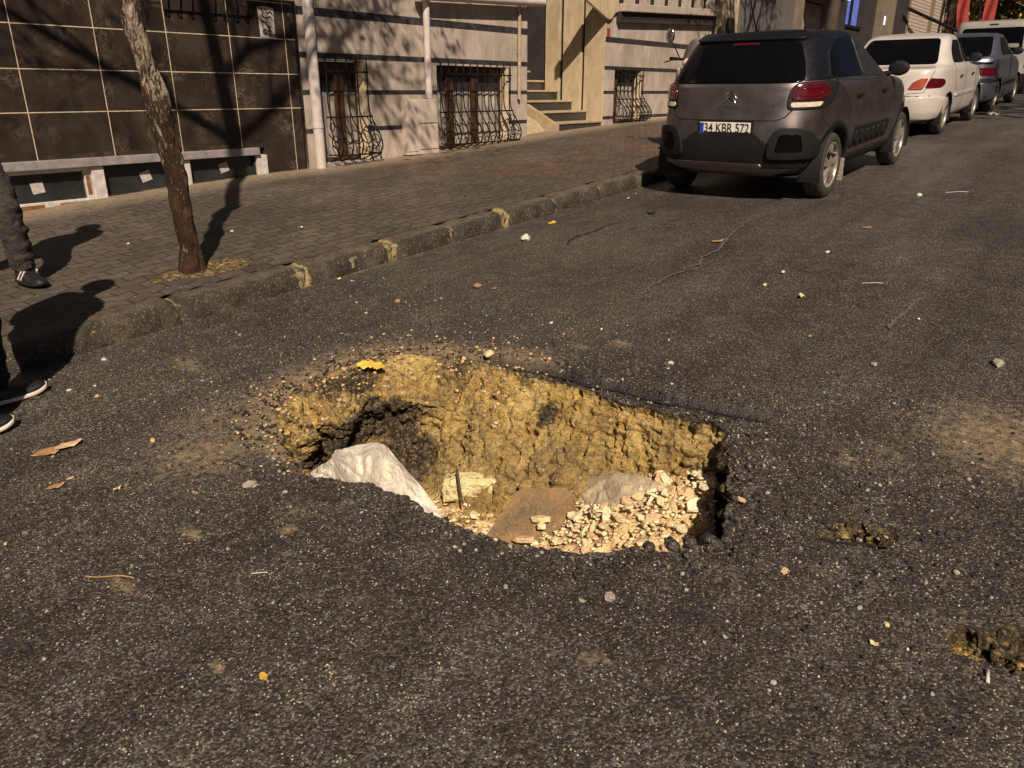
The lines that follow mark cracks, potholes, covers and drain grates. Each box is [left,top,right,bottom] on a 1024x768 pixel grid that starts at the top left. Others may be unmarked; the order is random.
pothole [945,622,1024,675]
crack [566,221,638,244]
pothole [818,520,901,550]
pothole [268,354,732,554]
